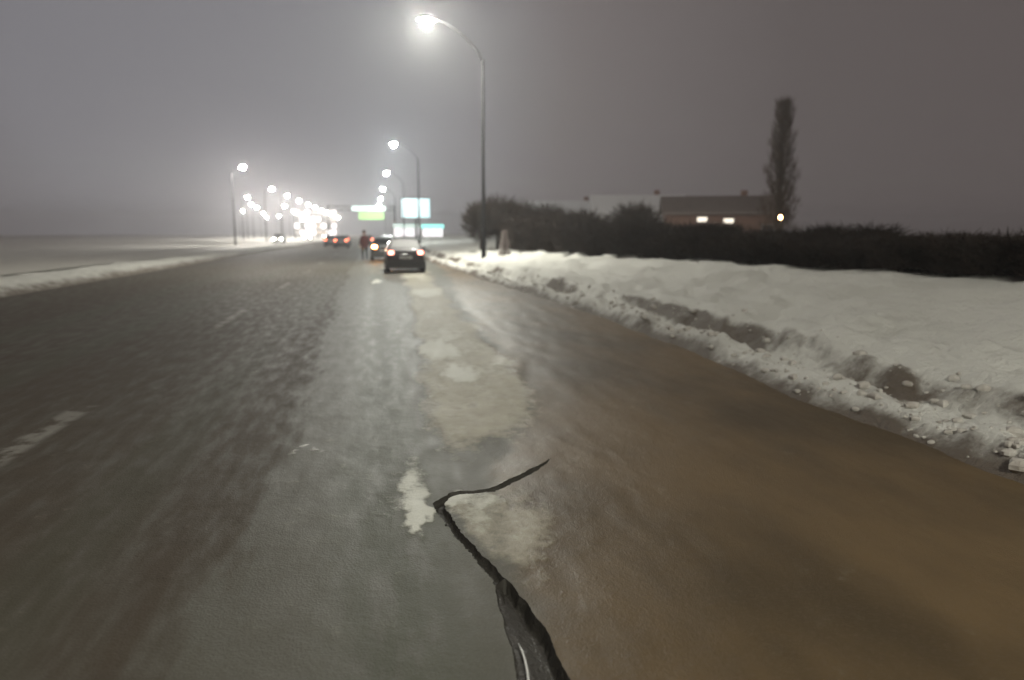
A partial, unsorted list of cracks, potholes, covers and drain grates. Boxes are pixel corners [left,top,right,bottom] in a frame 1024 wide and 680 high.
crack [433,458,551,585]
